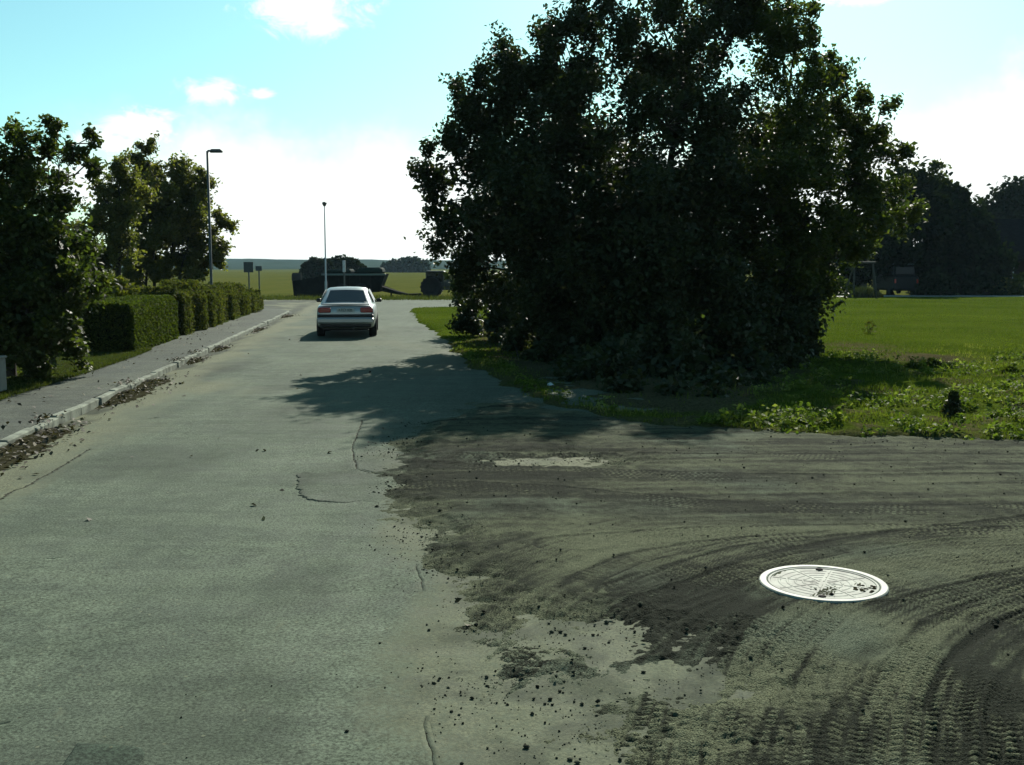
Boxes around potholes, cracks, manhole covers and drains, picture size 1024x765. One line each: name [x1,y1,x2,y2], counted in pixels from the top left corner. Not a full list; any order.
crack [0,448,94,501]
crack [349,420,380,475]
manhole cover [759,565,889,604]
crack [411,564,427,591]
